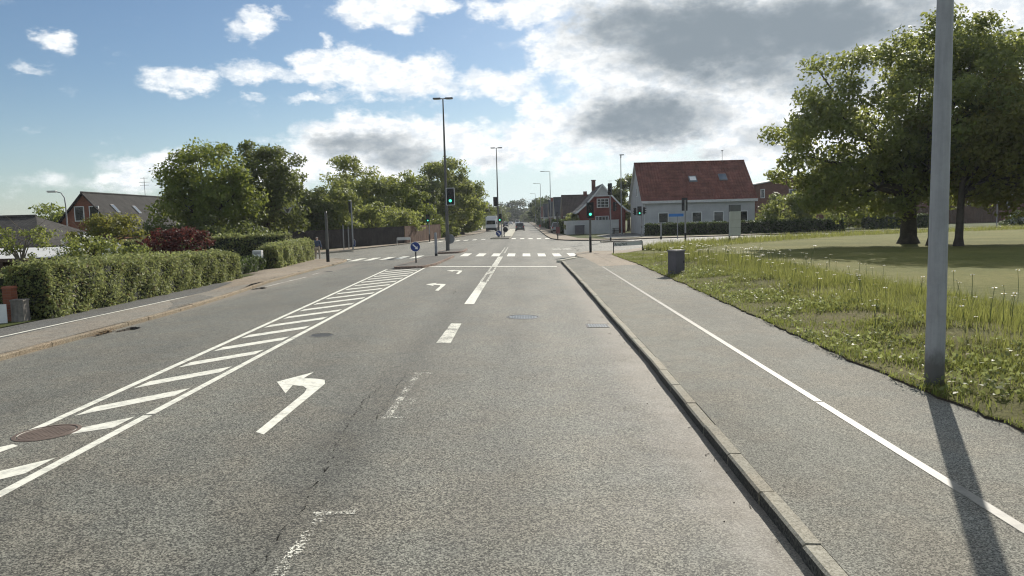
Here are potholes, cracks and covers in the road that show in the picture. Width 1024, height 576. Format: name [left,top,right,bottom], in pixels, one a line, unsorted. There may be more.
crack [249,375,406,575]
manhole cover [11,424,82,442]
